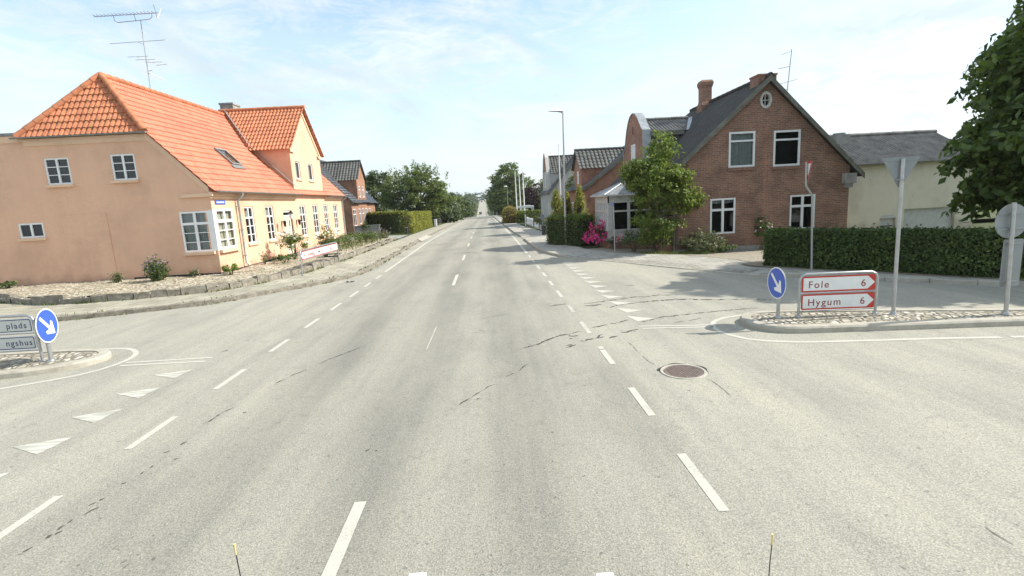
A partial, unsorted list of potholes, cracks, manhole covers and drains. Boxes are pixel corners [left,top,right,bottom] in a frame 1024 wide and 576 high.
crack [23,441,187,552]
manhole cover [657,363,708,380]
crack [459,294,759,405]
